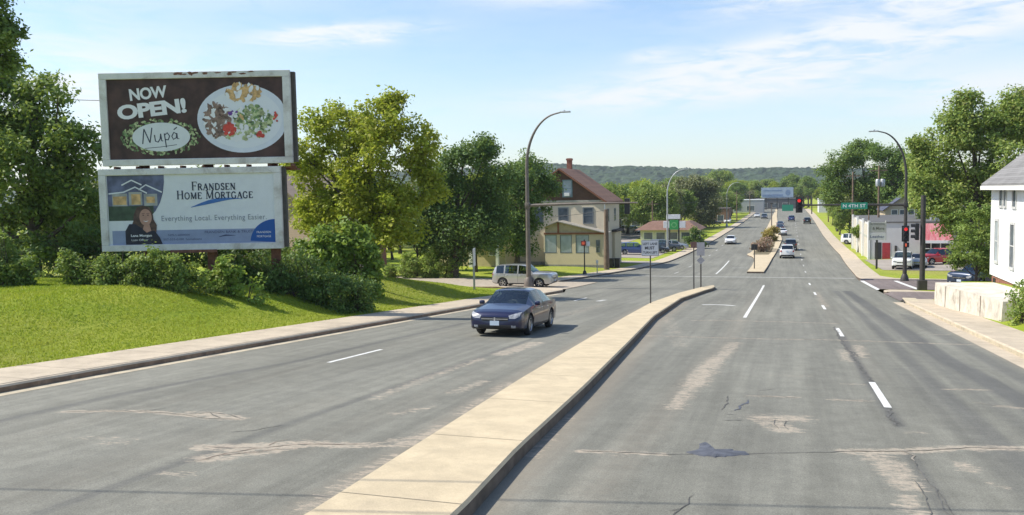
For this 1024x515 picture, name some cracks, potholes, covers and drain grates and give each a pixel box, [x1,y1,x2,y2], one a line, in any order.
crack [721,389,790,429]
crack [886,408,902,425]
crack [833,327,874,382]
